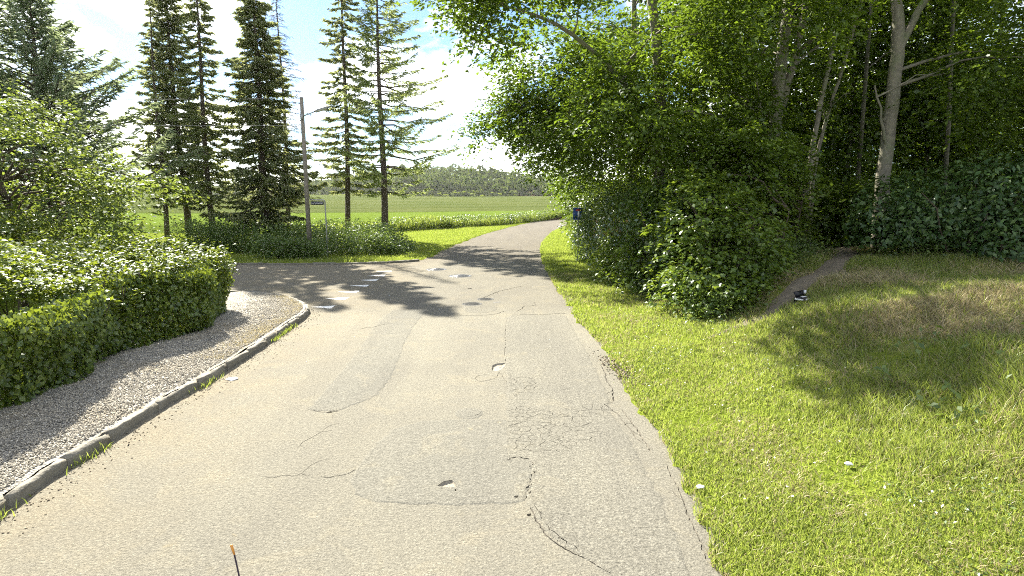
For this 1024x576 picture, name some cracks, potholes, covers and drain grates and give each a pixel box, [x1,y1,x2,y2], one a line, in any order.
crack [509,365,708,568]
